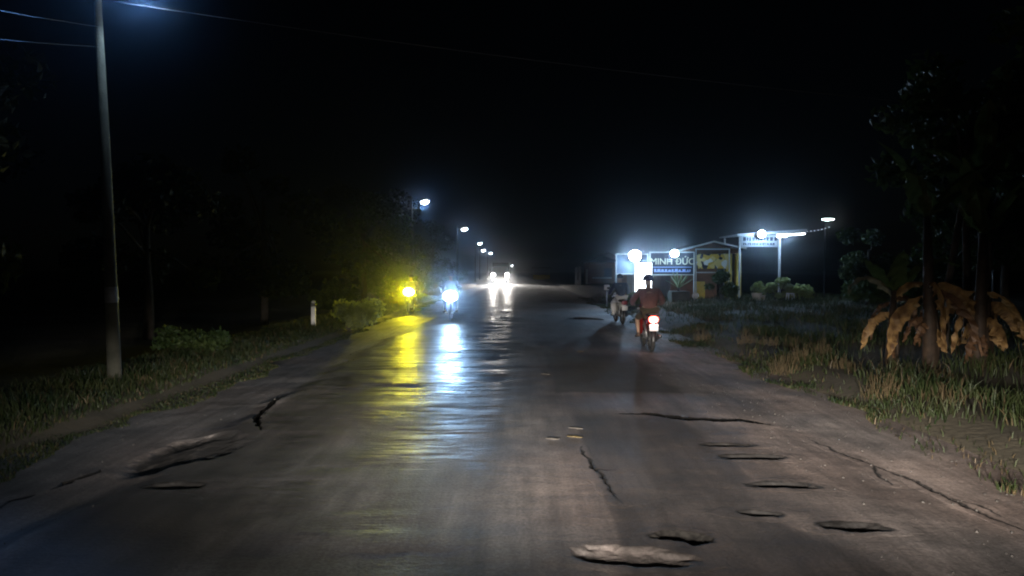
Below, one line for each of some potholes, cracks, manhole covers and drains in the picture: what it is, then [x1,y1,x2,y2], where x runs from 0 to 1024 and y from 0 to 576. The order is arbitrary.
pothole [668,441,780,449]
pothole [709,478,852,492]
pothole [627,526,734,551]
crack [0,461,122,513]
pothole [537,538,733,574]
pothole [704,506,812,522]
crack [611,411,781,427]
pothole [109,479,233,495]
crack [800,437,1024,536]
crack [571,444,633,508]
crack [246,392,298,433]
